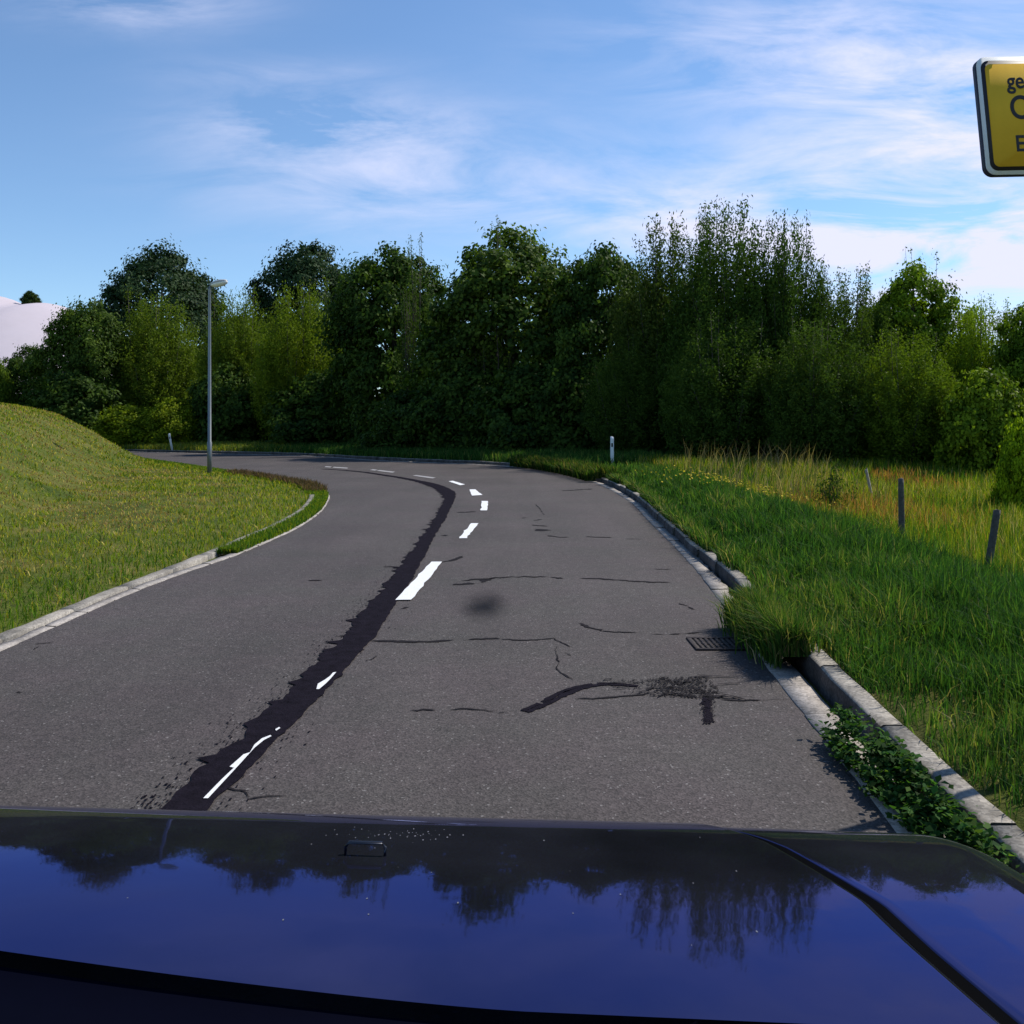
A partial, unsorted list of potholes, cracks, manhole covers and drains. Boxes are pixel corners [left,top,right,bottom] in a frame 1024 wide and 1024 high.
drain grate [686,637,755,651]
crack [524,505,612,538]
crack [368,623,634,679]
crack [443,556,653,585]
